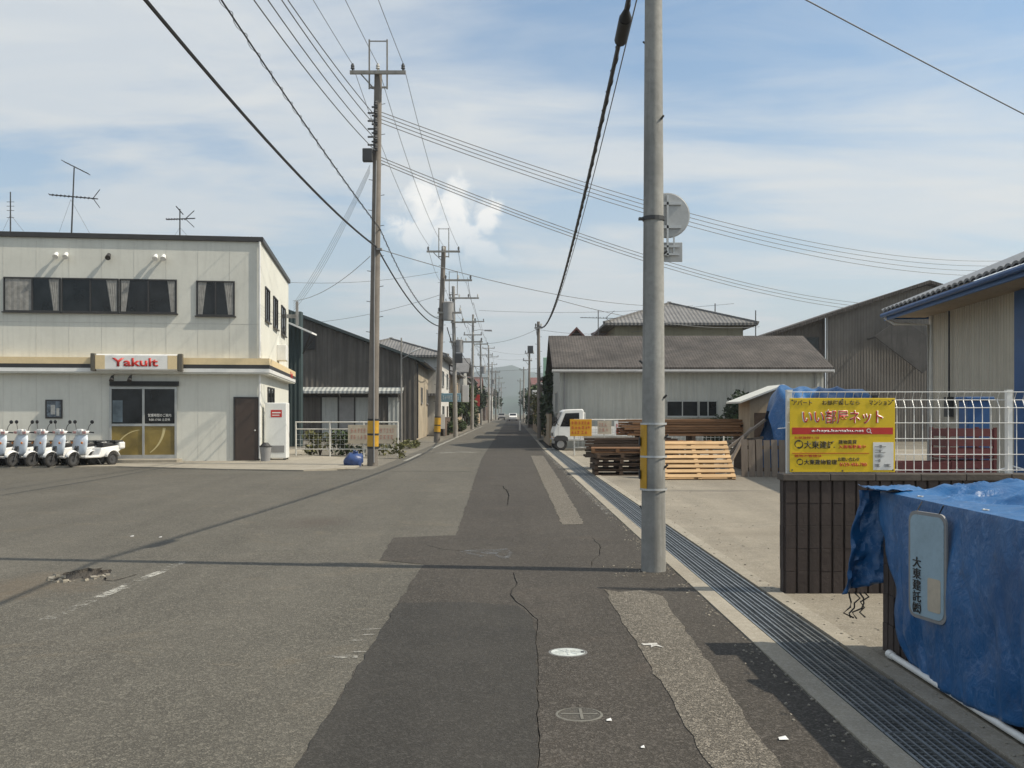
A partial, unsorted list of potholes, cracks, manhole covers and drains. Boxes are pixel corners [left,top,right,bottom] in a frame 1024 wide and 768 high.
drain grate [776,642,888,680]
drain grate [821,680,963,733]
drain grate [666,537,697,547]
manhole cover [556,707,603,721]
drain grate [883,732,1015,768]
drain grate [742,614,834,642]
drain grate [695,574,761,592]
manhole cover [549,648,587,657]
pothole [46,568,112,583]
drain grate [666,547,718,560]
drain grate [678,559,736,574]
crack [509,572,541,768]
